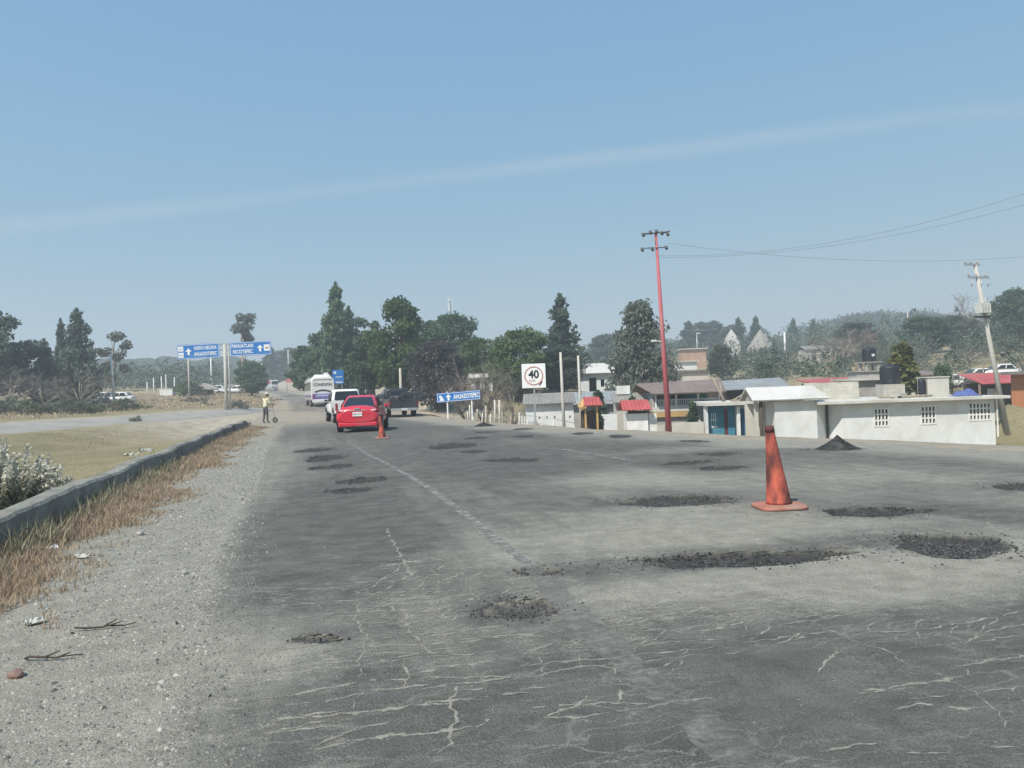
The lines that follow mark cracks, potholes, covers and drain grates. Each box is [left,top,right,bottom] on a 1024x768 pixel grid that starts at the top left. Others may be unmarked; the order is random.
pothole [842,529,1024,573]
pothole [329,475,394,485]
pothole [797,502,970,519]
pothole [414,440,493,450]
pothole [294,454,364,465]
pothole [973,481,1024,494]
pothole [537,543,975,574]
pothole [482,455,560,464]
pothole [319,485,384,496]
pothole [286,631,351,644]
pothole [451,593,583,627]
pothole [307,461,368,471]
